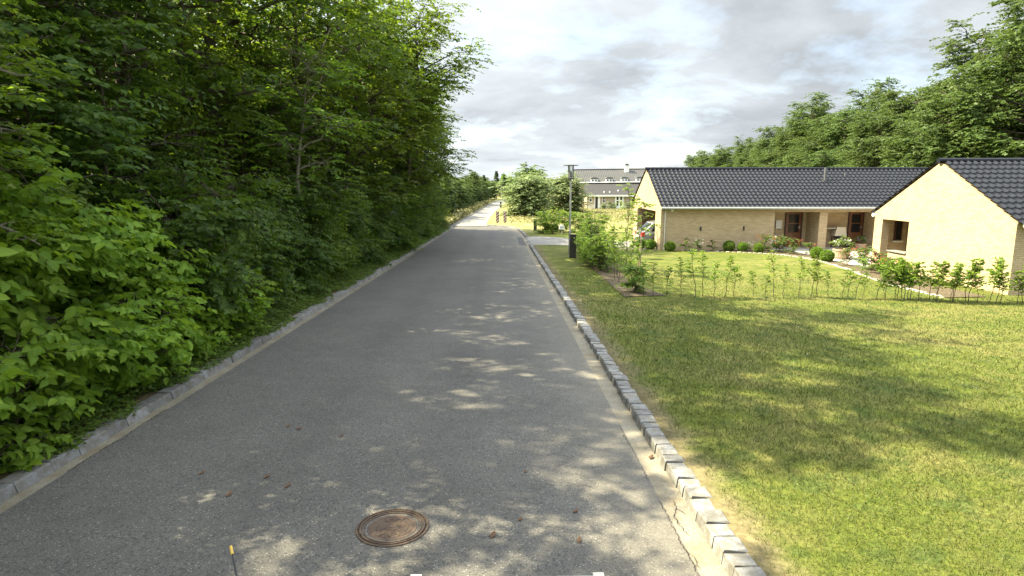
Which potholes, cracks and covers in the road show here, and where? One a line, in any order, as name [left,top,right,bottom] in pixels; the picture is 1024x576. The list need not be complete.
manhole cover [355,509,429,547]
